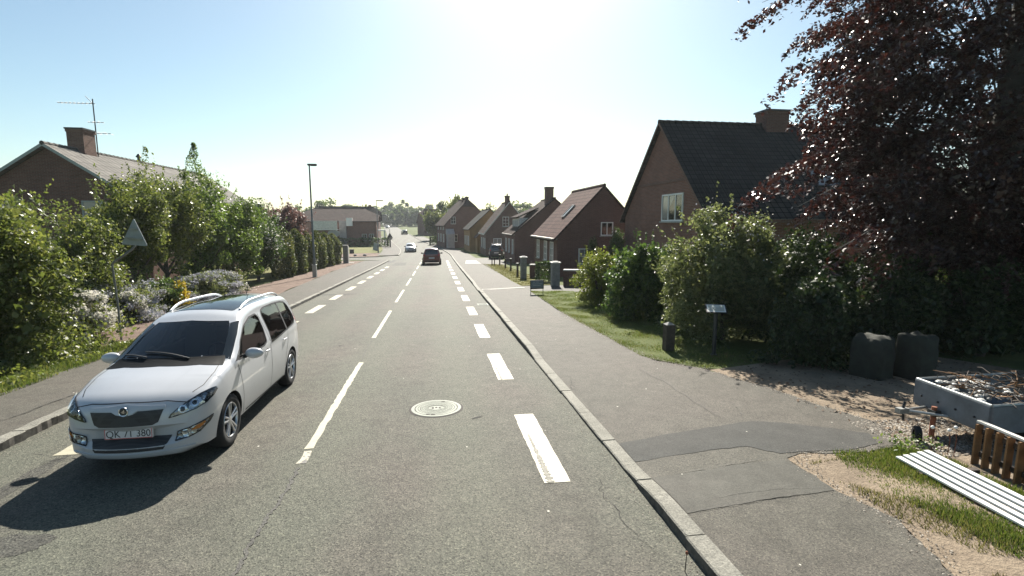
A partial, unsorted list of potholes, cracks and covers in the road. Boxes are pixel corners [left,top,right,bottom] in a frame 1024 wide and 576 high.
crack [584,480,658,555]
manhole cover [409,400,463,418]
